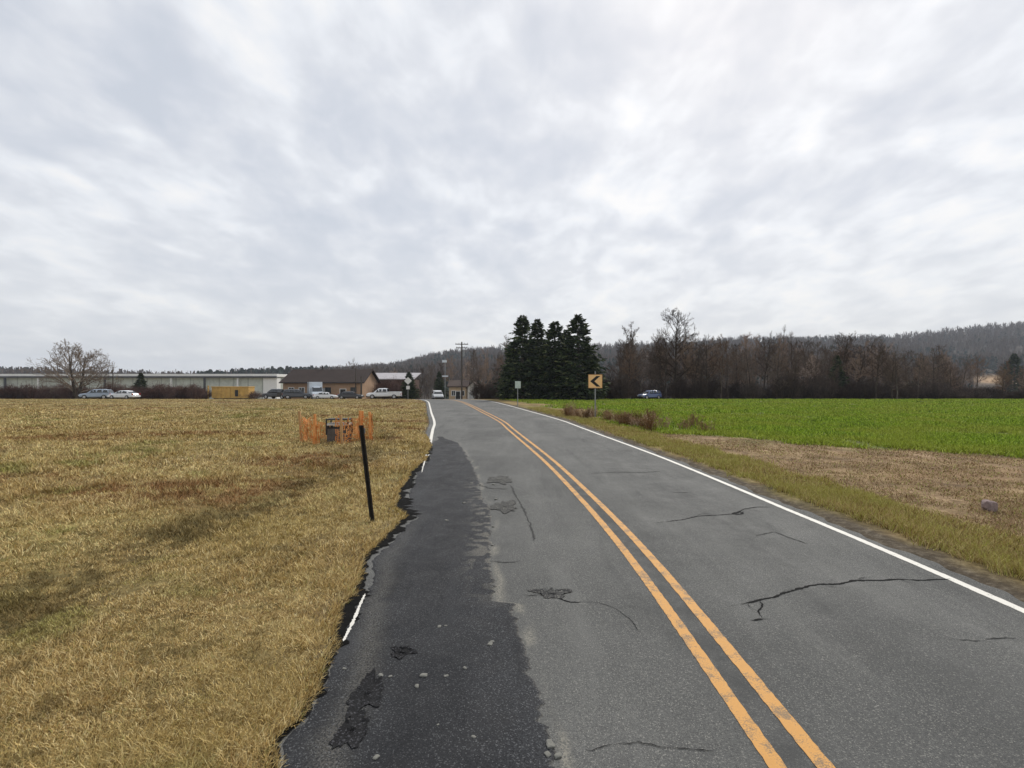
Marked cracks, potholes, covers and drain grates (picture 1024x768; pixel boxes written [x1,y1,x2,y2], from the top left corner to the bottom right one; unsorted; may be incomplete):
pothole [345,667,383,718]
crack [658,507,755,523]
pothole [486,476,513,485]
crack [479,484,535,541]
pothole [489,500,517,514]
crack [731,577,936,620]
pothole [528,587,572,598]
pothole [391,645,418,659]
crack [590,741,716,751]
pothole [329,708,371,749]
